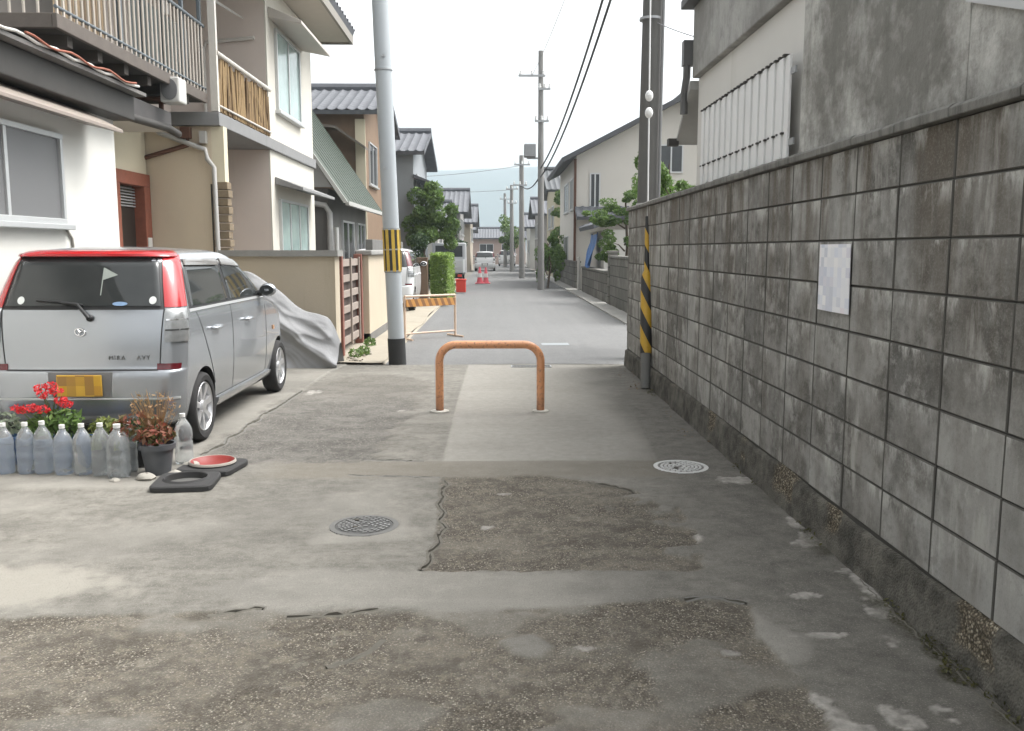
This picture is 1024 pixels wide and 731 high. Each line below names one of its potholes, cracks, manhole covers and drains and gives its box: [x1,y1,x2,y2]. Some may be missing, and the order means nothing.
manhole cover [653,460,709,474]
crack [199,390,303,455]
crack [348,459,451,571]
crack [287,607,378,620]
crack [207,606,264,617]
manhole cover [329,515,399,536]
